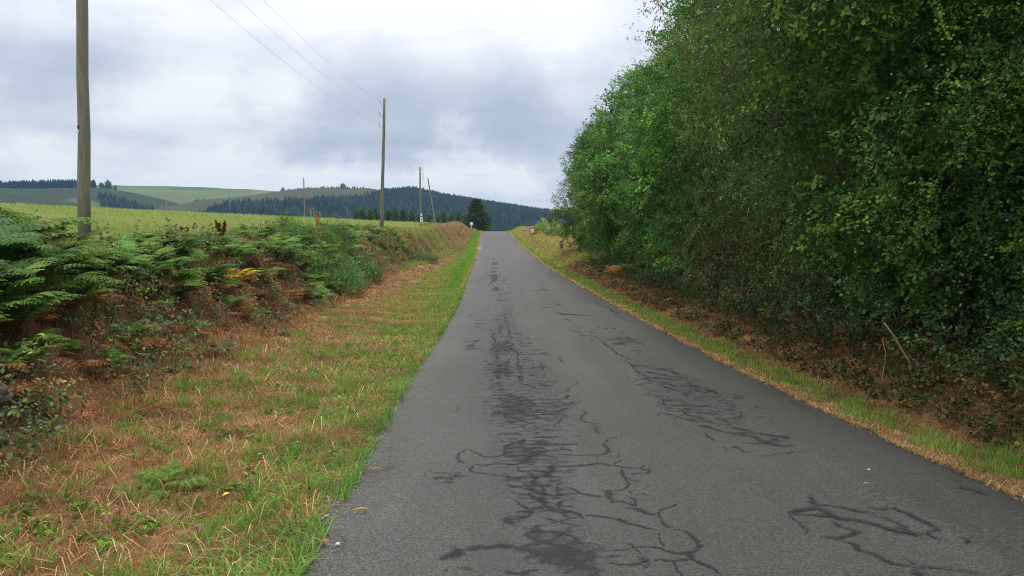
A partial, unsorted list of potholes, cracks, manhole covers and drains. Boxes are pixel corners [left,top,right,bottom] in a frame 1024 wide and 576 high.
crack [434,259,797,576]
crack [787,489,985,575]
